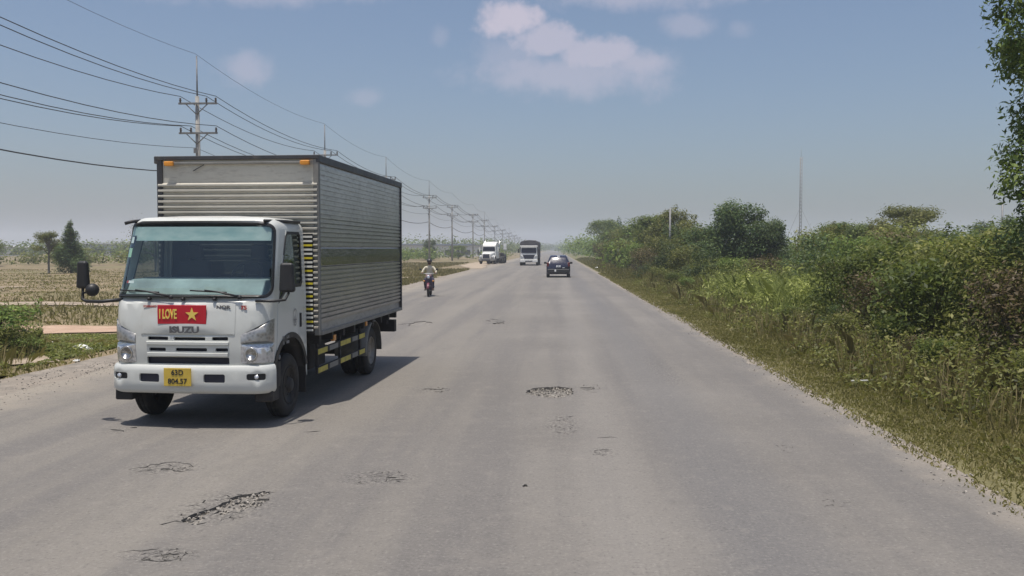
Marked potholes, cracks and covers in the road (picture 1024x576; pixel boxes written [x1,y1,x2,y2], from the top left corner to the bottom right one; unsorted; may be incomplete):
pothole [526,386,574,398]
pothole [161,491,273,525]
